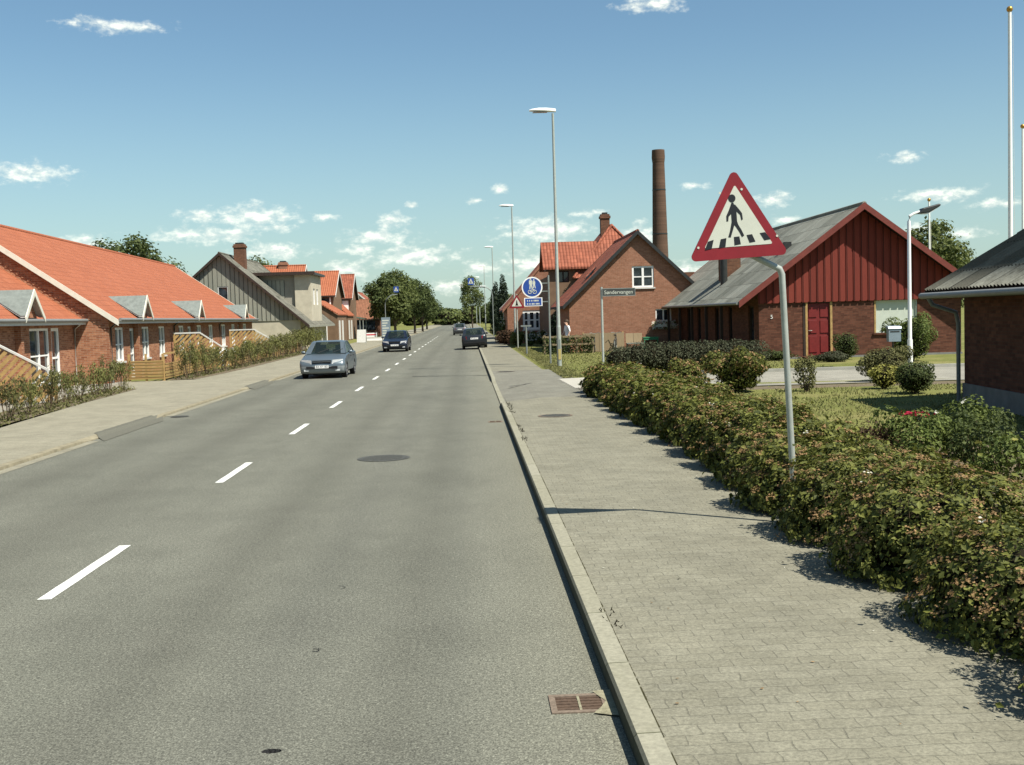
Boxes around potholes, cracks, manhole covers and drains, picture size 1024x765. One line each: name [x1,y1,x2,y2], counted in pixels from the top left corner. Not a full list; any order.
drain grate [548,689,619,715]
